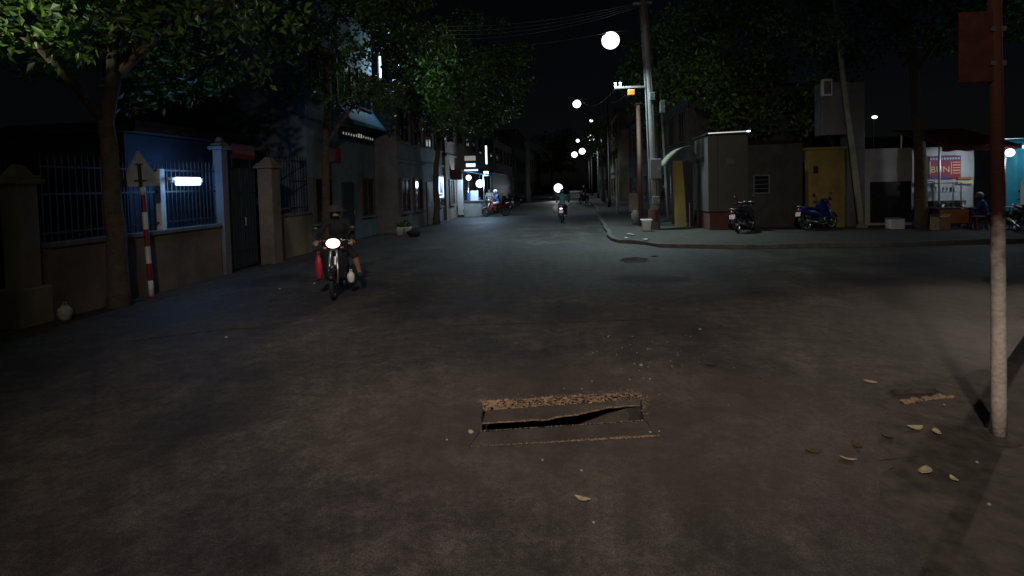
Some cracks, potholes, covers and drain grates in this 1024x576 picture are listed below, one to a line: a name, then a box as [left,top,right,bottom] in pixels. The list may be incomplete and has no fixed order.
pothole [470,389,660,447]
pothole [884,388,955,405]
